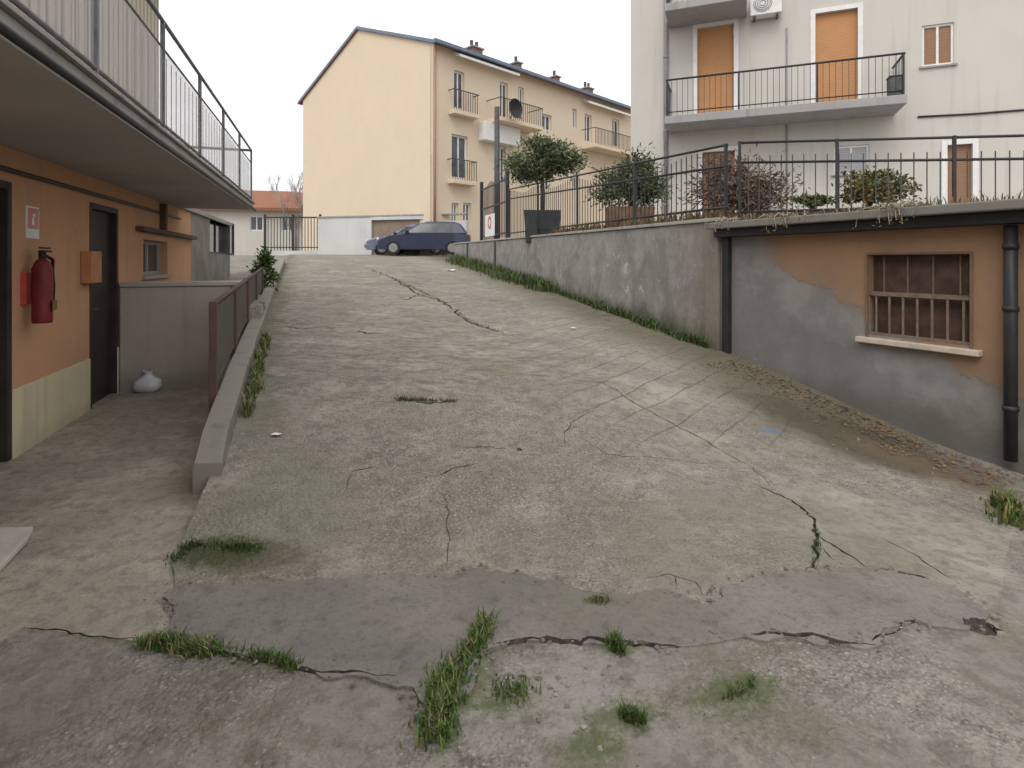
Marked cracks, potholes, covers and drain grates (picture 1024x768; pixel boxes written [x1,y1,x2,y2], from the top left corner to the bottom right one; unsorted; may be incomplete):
pothole [962,618,1003,636]
crack [751,619,925,647]
crack [364,267,504,334]
crack [441,446,504,568]
crack [755,484,967,596]
crack [563,410,748,473]
